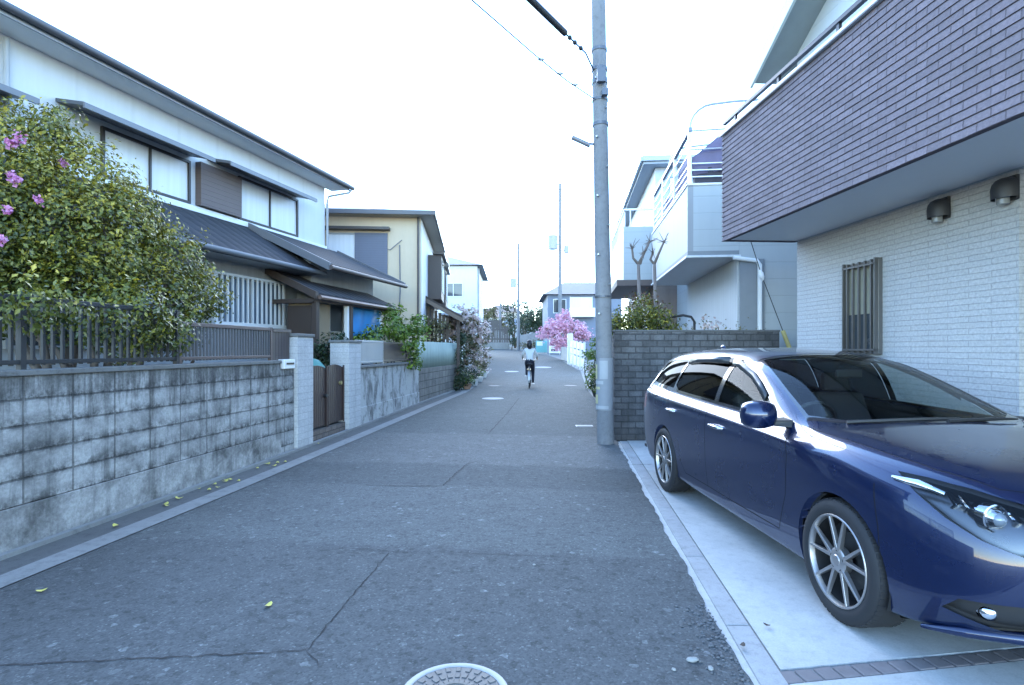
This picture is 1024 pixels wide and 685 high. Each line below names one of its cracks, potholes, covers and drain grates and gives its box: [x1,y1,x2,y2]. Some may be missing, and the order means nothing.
manhole cover [405,663,507,685]
crack [2,548,578,665]
